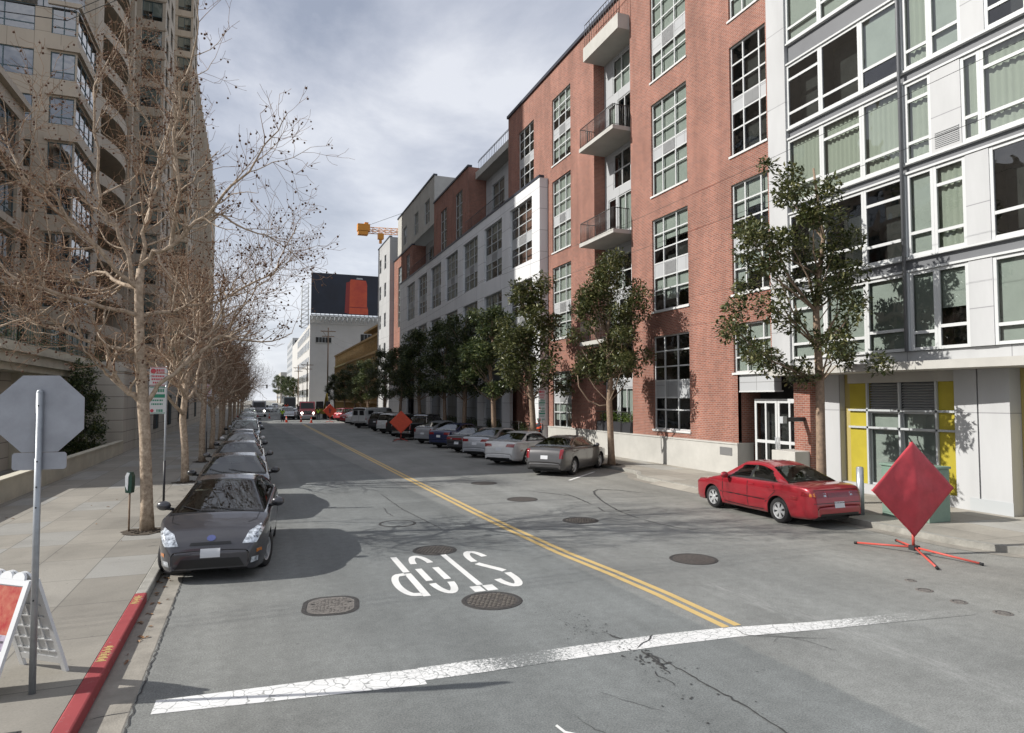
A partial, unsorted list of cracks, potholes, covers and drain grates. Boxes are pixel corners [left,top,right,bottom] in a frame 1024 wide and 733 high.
manhole cover [669,553,718,565]
manhole cover [301,596,359,616]
manhole cover [413,545,457,555]
crack [524,599,787,733]
manhole cover [461,591,523,610]
